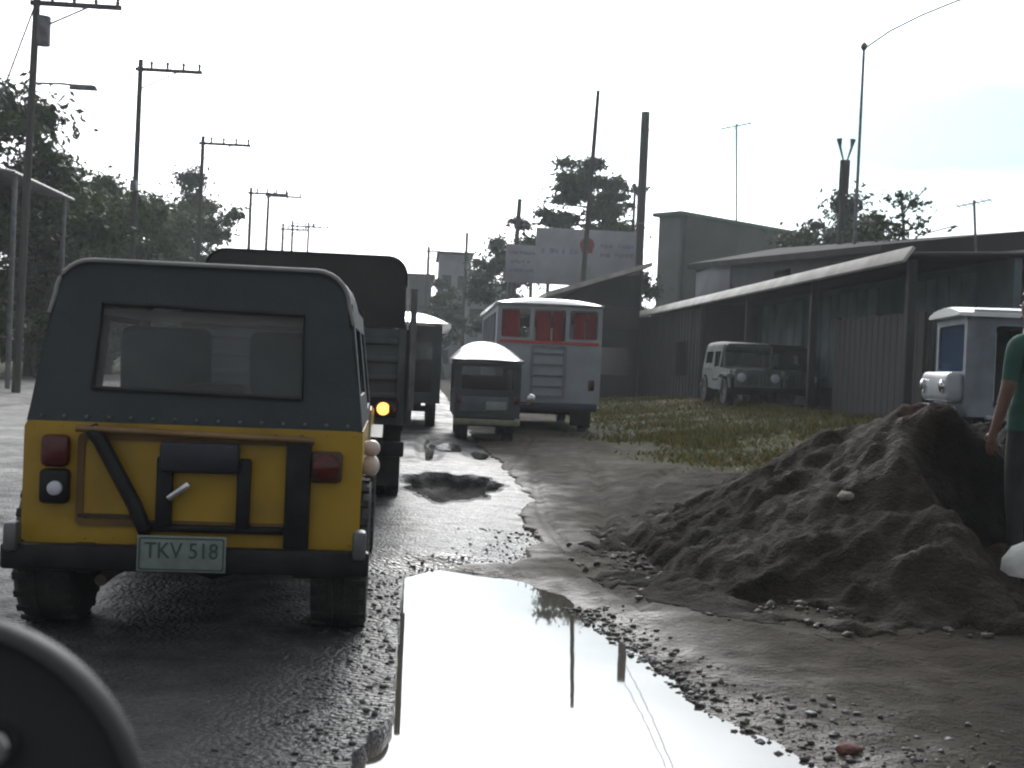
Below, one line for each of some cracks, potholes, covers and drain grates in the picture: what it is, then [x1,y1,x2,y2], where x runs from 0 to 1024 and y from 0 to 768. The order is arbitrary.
pothole [399,471,509,505]
